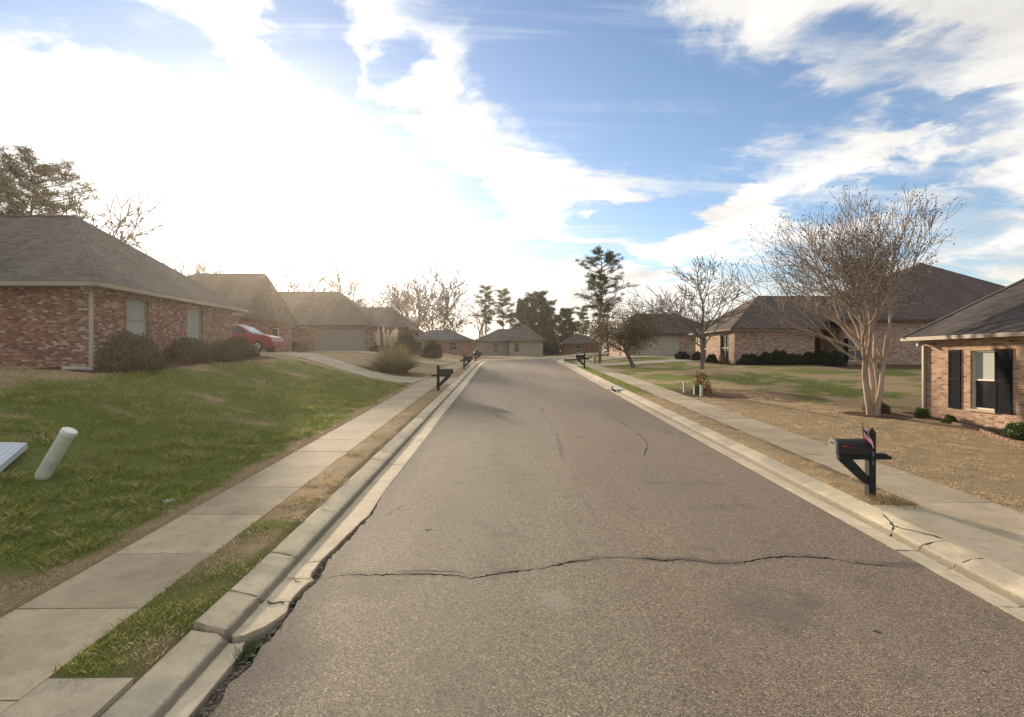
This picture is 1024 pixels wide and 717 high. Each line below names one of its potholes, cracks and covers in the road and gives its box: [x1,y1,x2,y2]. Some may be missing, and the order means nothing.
crack [260,504,920,622]
crack [884,515,943,539]
